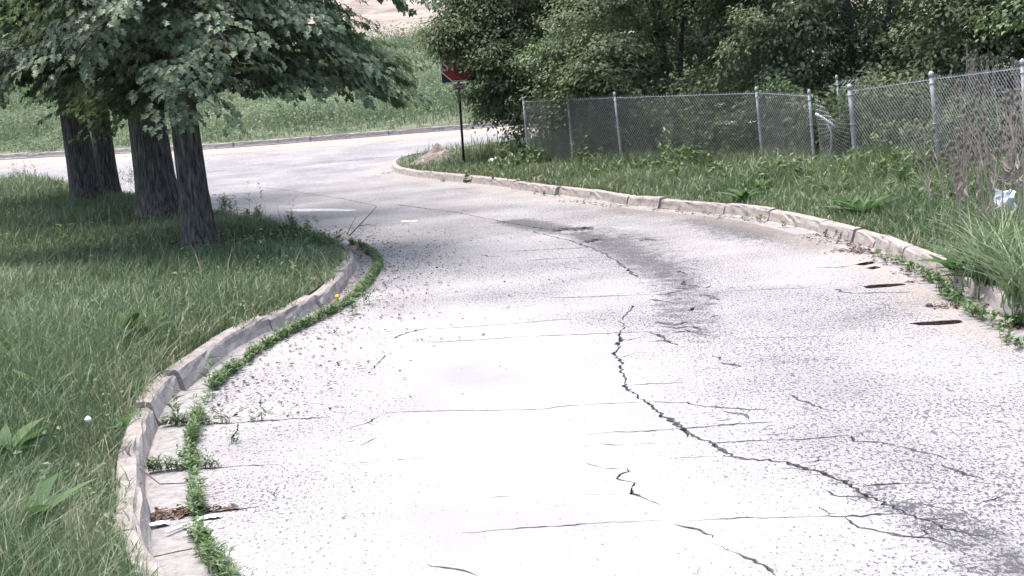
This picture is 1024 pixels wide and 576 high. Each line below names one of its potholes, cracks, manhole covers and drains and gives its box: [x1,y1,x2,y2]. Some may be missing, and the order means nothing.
crack [200,271,1016,576]
